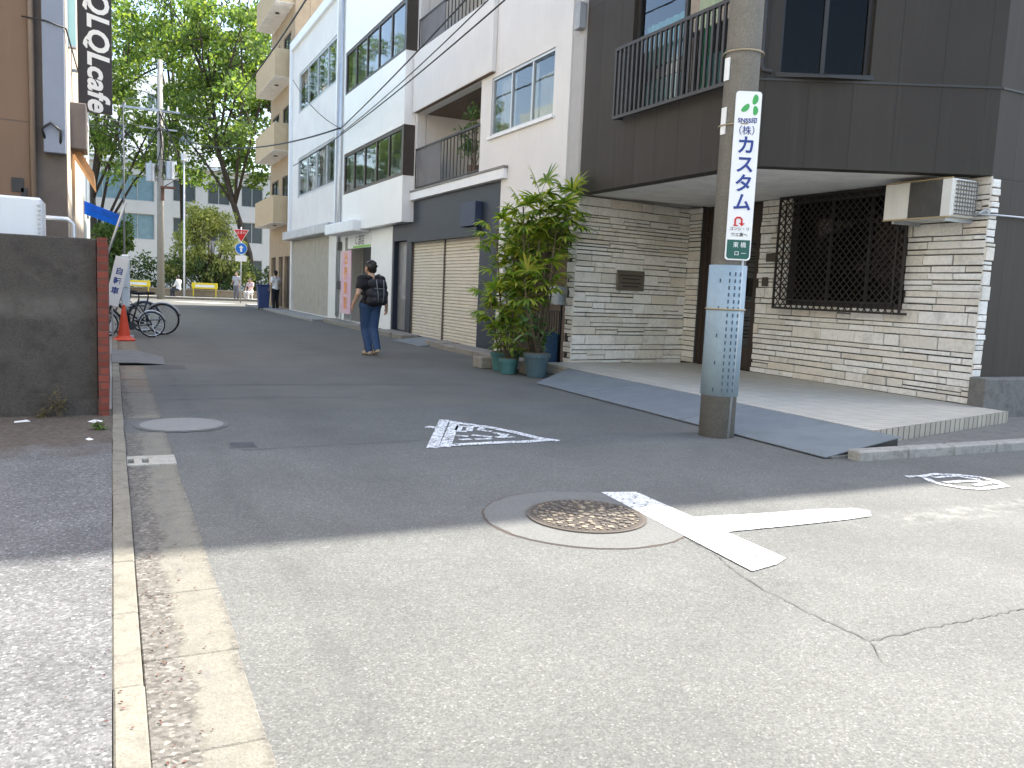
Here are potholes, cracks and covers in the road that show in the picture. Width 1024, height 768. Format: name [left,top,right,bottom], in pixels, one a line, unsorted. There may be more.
crack [689,539,1024,666]
manhole cover [133,417,229,432]
manhole cover [482,491,686,549]
